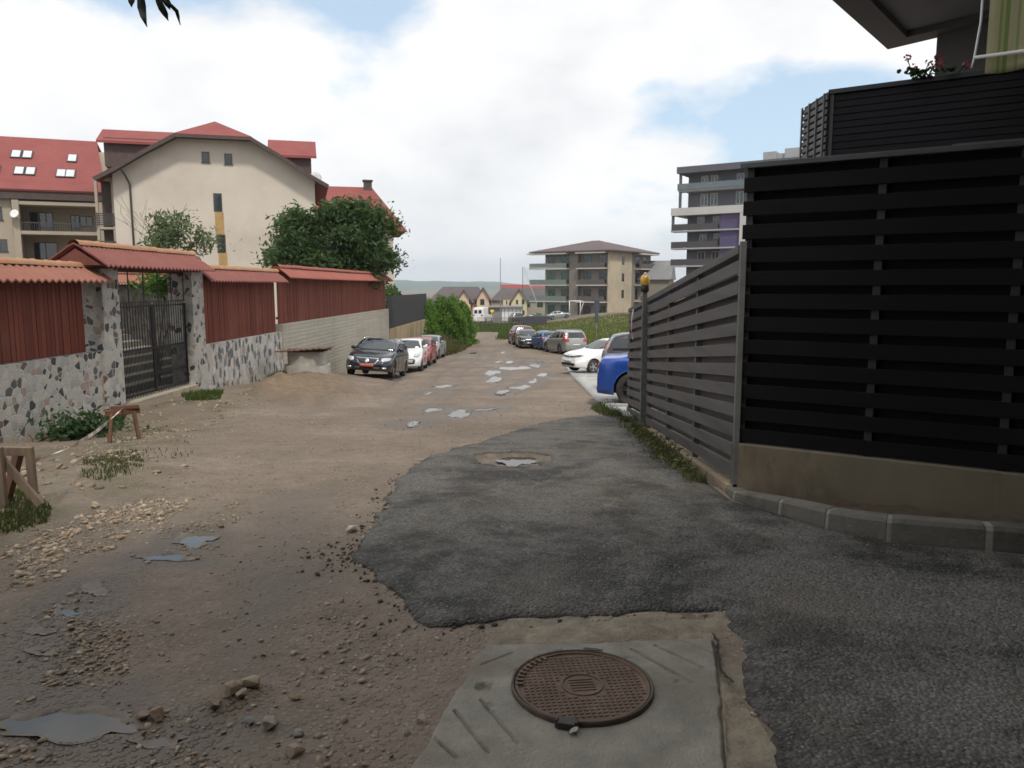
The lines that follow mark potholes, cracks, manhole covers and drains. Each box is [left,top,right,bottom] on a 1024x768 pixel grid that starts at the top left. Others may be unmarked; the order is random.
manhole cover [511,647,654,731]
pothole [0,705,157,745]
pothole [475,452,552,467]
